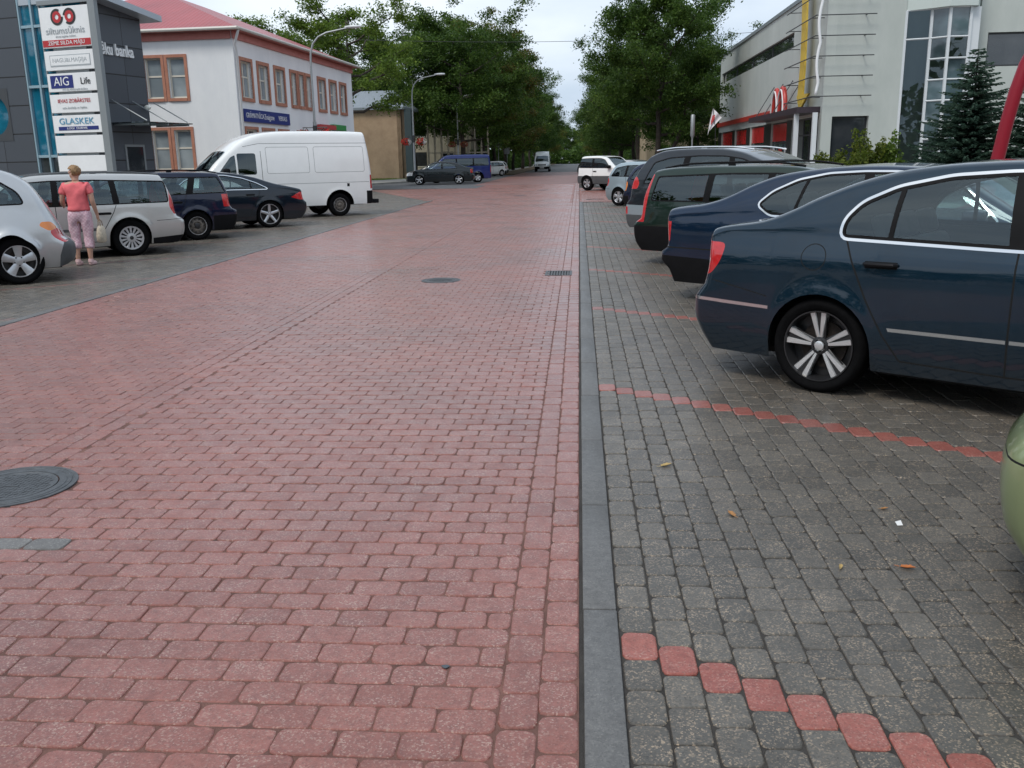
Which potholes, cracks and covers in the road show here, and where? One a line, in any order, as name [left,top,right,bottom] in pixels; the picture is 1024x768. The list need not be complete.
manhole cover [0,466,79,508]
